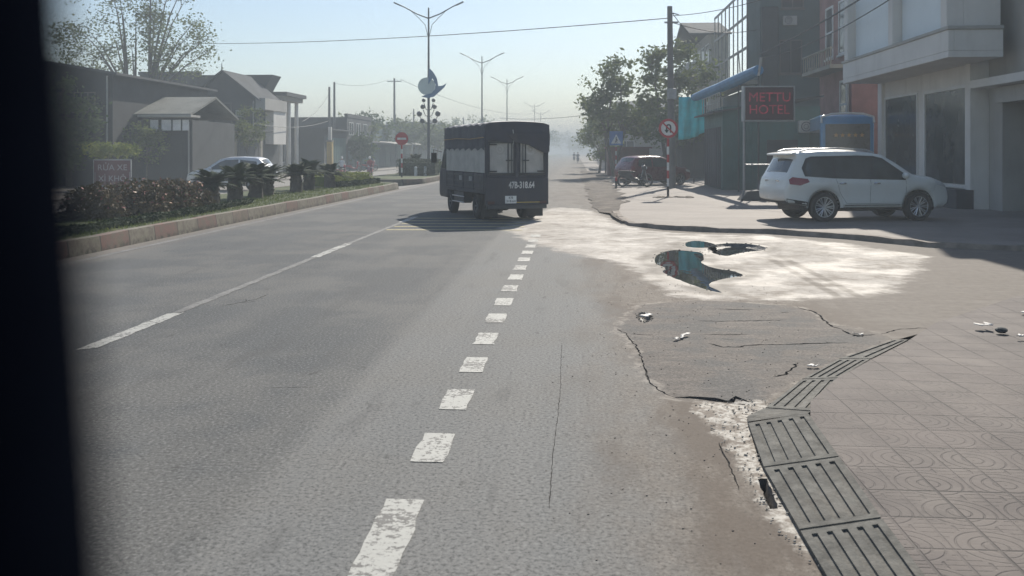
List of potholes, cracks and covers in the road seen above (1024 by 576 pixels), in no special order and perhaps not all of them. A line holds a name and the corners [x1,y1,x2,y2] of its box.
crack [618,329,751,405]
pothole [653,249,743,293]
pothole [707,243,767,256]
crack [703,308,916,347]
pothole [683,241,718,250]
crack [719,444,739,490]
